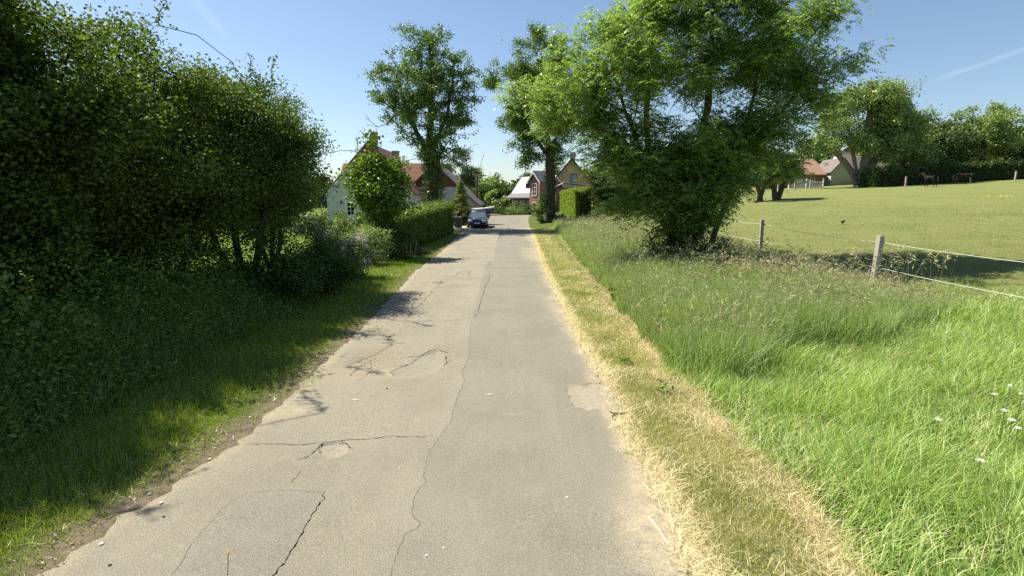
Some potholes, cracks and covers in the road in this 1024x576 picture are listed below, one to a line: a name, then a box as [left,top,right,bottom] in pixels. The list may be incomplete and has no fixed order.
crack [347,342,451,381]
crack [171,435,432,576]
crack [404,271,495,321]
